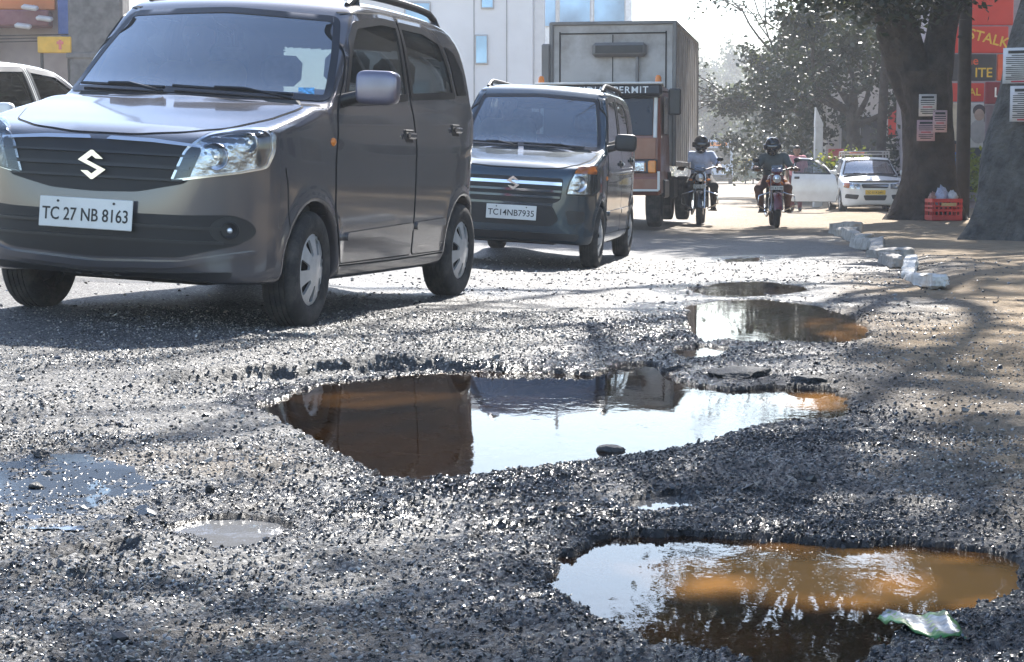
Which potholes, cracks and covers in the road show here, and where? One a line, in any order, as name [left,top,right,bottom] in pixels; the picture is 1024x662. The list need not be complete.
pothole [11,353,892,485]
pothole [492,515,1024,662]
pothole [675,281,824,298]
pothole [141,508,315,551]
pothole [662,298,897,347]
